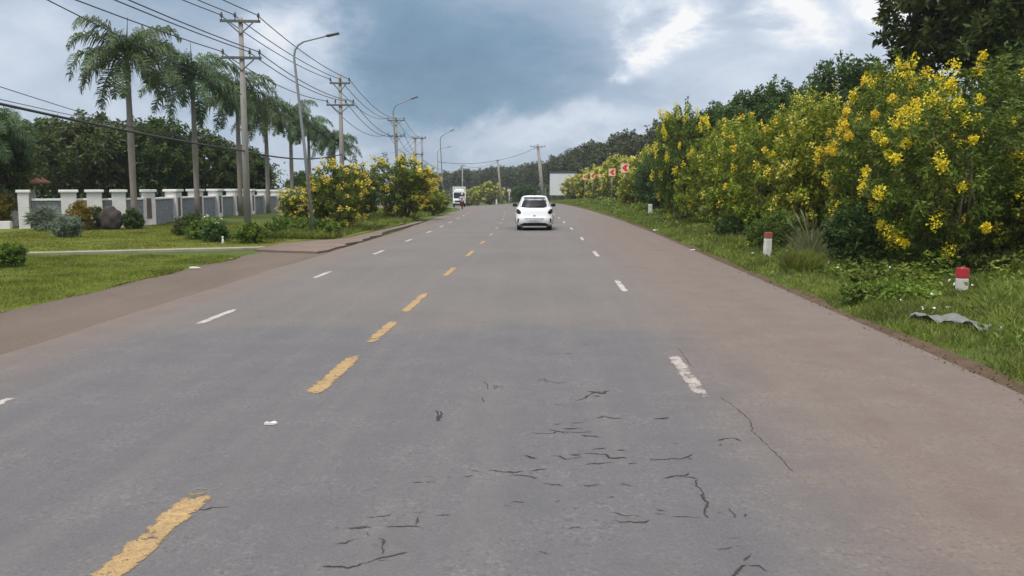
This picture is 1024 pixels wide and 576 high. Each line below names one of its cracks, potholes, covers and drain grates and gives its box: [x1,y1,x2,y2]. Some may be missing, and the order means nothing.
crack [323,511,449,569]
crack [495,416,767,576]
